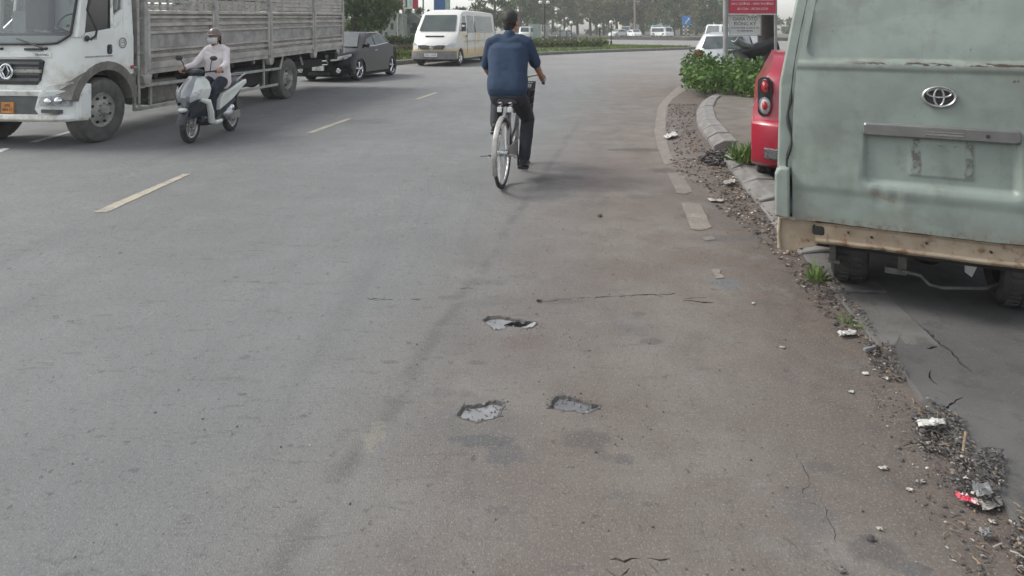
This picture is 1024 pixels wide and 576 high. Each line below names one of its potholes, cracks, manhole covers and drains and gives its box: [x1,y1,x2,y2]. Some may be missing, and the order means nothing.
pothole [477,315,541,331]
crack [919,324,972,410]
pothole [544,393,602,414]
pothole [451,398,511,424]
crack [605,558,670,576]
crack [545,293,713,303]
crack [787,439,837,544]
